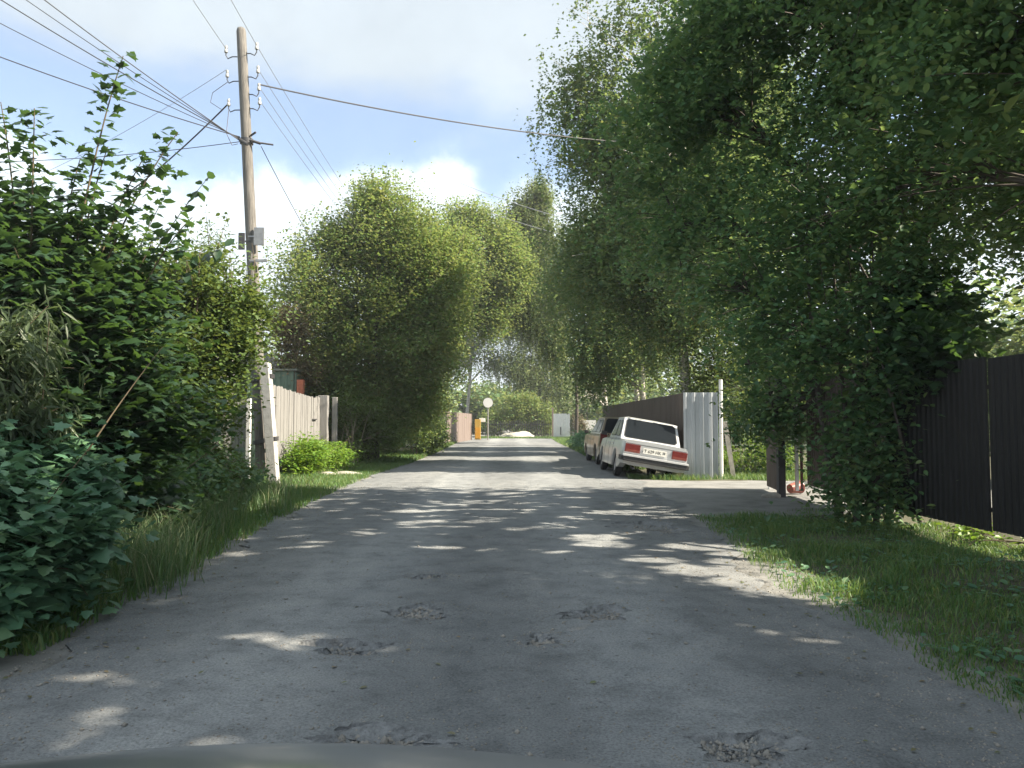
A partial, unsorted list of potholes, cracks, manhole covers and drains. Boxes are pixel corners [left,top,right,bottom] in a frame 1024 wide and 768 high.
pothole [683,729,816,768]
pothole [555,604,632,620]
pothole [380,603,454,620]
pothole [298,638,399,656]
pothole [304,722,464,748]
pothole [525,632,561,646]
